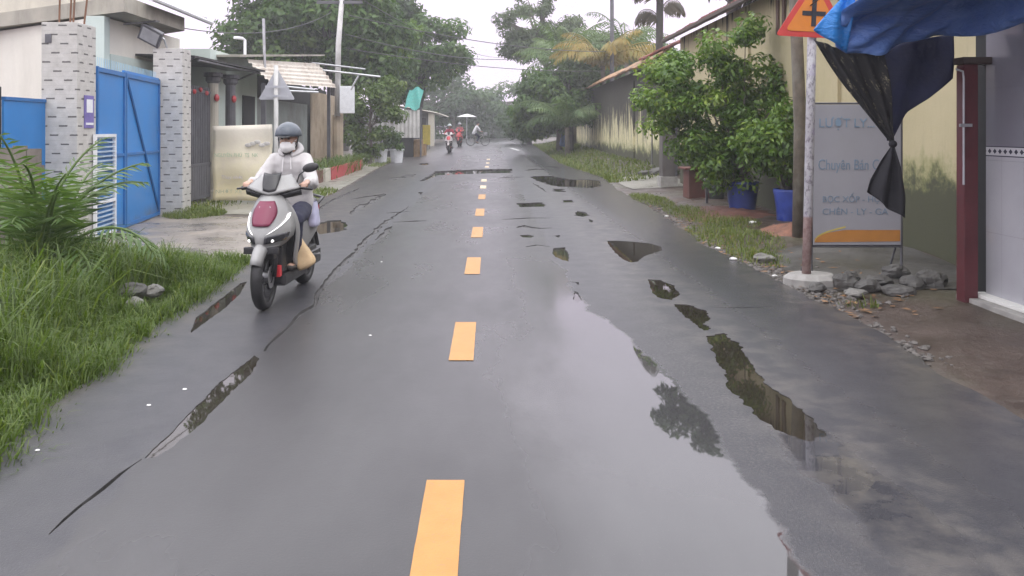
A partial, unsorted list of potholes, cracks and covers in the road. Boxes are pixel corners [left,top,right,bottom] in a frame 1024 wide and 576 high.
crack [49,459,142,534]
pothole [421,169,513,181]
pothole [552,247,569,261]
pothole [706,333,827,442]
pothole [316,220,348,234]
pothole [674,304,711,330]
pothole [648,279,680,300]
pothole [191,282,247,333]
pothole [531,176,602,188]
pothole [608,241,662,262]
pothole [145,355,259,458]
crack [264,174,418,351]
